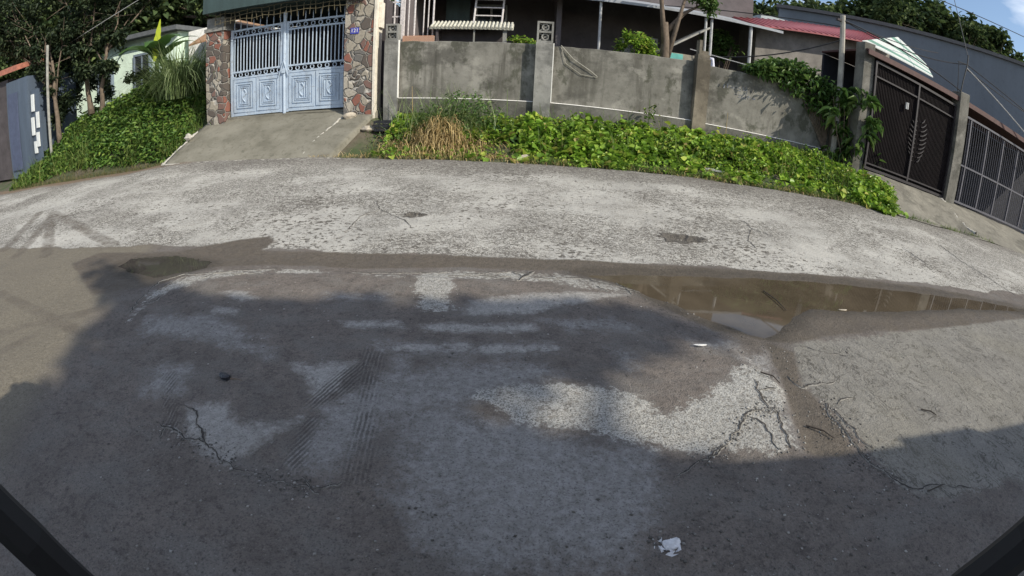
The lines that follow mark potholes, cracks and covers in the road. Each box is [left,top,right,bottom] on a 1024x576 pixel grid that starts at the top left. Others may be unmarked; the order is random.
crack [743,221,771,248]
crack [159,405,342,494]
crack [345,201,412,232]
crack [673,376,971,492]
